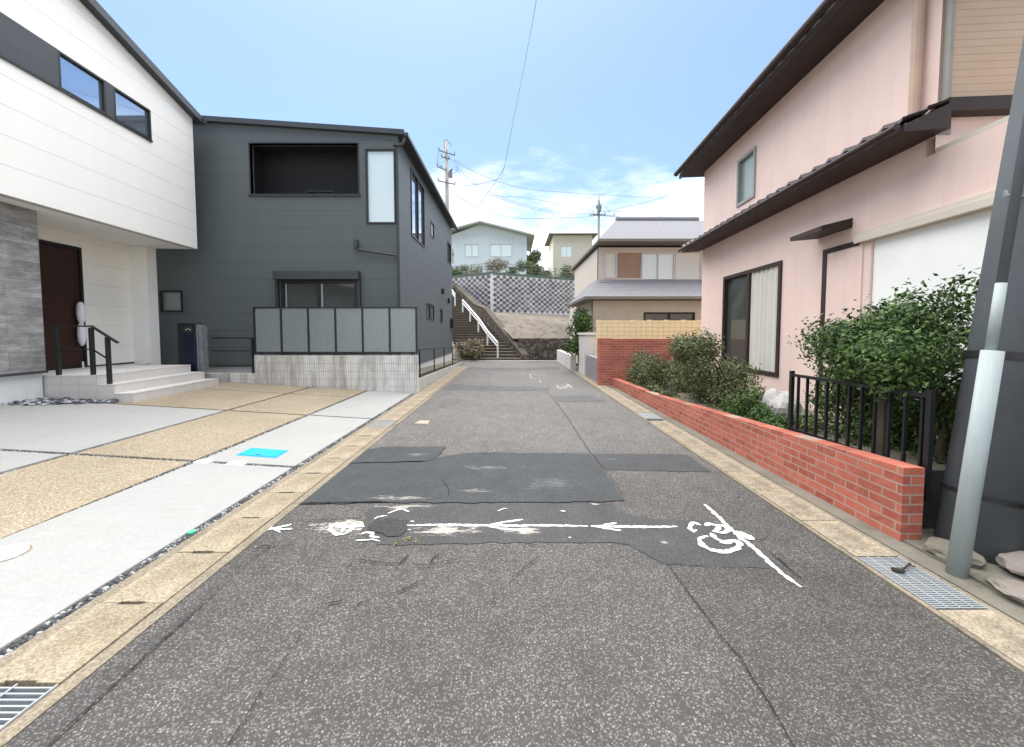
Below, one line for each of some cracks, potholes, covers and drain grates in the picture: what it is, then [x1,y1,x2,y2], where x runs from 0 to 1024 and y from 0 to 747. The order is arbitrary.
drain grate [856,556,988,610]
crack [348,553,456,593]
drain grate [637,413,662,421]
drain grate [0,684,59,732]
